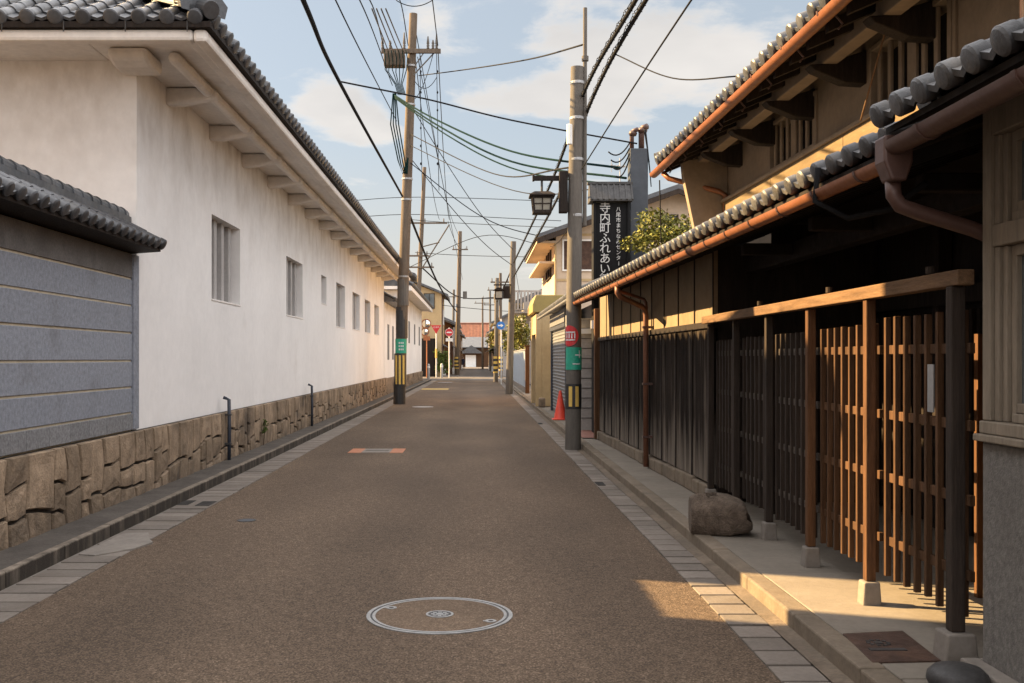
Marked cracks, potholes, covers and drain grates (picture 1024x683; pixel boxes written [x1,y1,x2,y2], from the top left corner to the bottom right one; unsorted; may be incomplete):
manhole cover [843,631,941,664]
manhole cover [366,597,513,635]
